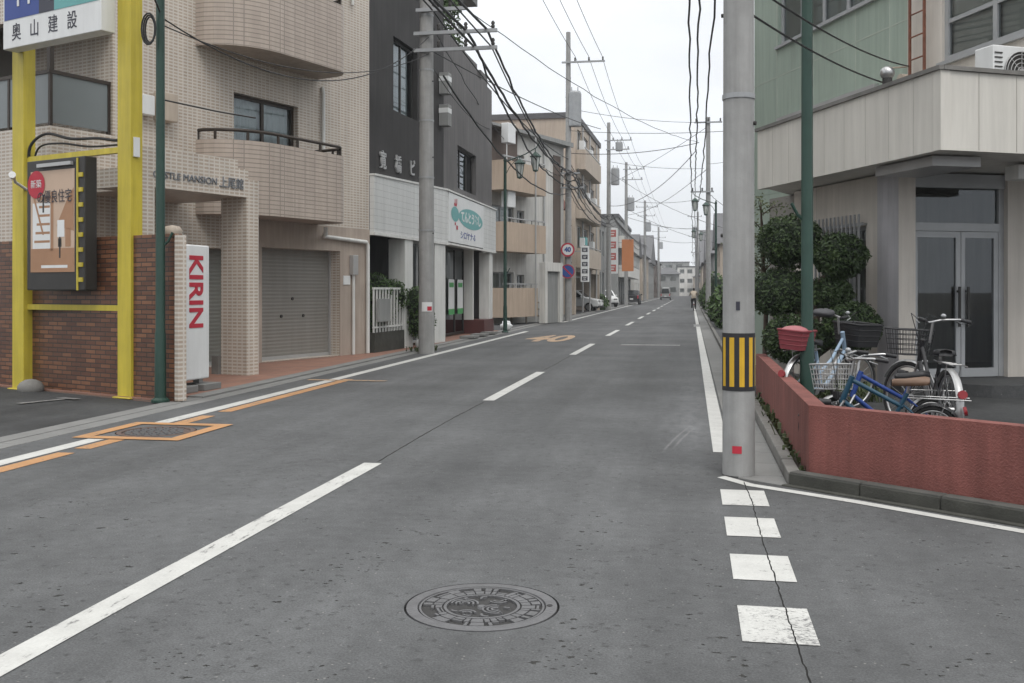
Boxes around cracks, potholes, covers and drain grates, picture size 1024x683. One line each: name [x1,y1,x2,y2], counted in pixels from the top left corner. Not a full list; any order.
manhole cover [115,426,197,437]
manhole cover [404,583,560,632]
